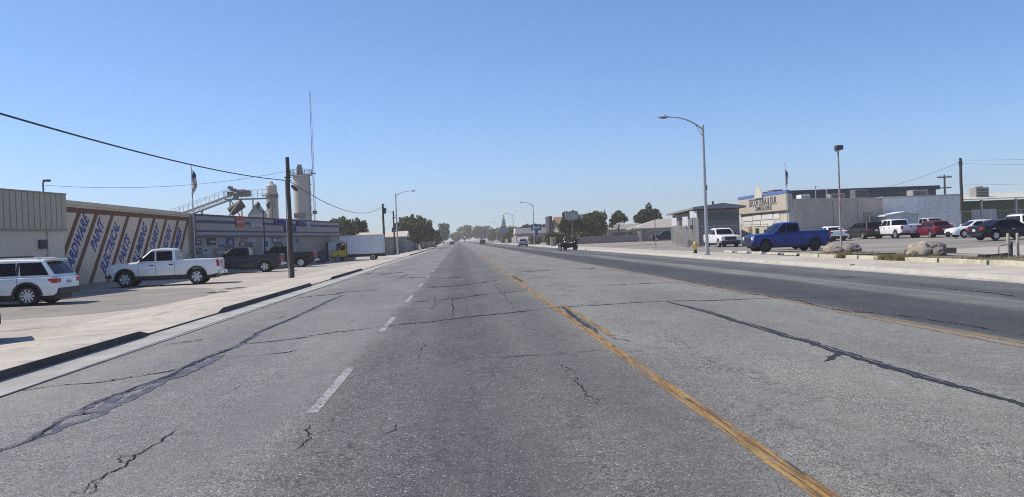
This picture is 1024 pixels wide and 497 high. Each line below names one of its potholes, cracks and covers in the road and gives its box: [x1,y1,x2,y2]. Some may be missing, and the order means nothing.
crack [246,272,884,344]
crack [70,431,174,496]
crack [22,368,179,391]
crack [502,337,629,403]
